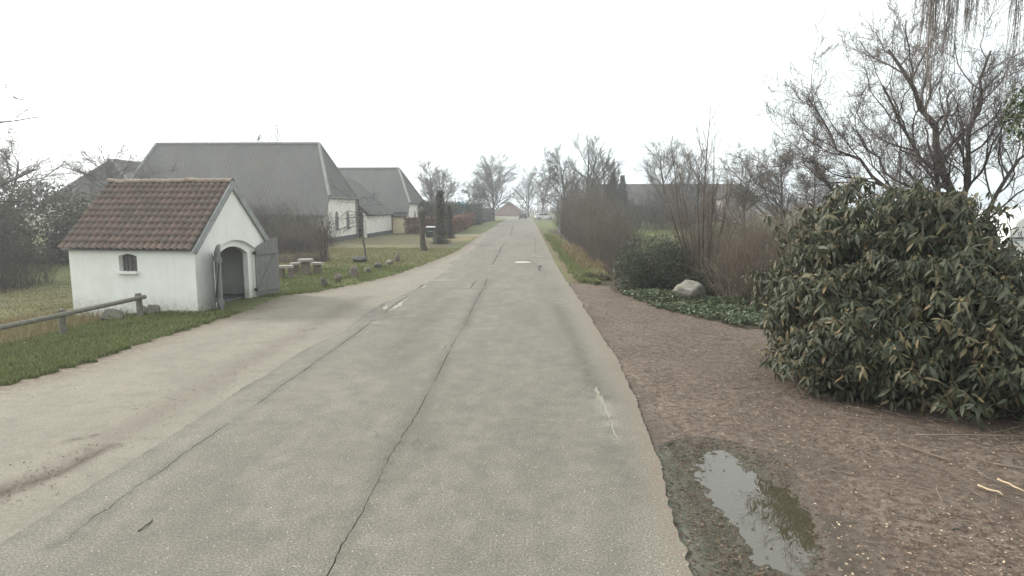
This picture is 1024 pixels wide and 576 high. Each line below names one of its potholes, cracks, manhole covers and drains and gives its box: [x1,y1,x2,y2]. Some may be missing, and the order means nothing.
crack [327,281,560,576]
crack [593,387,618,442]
